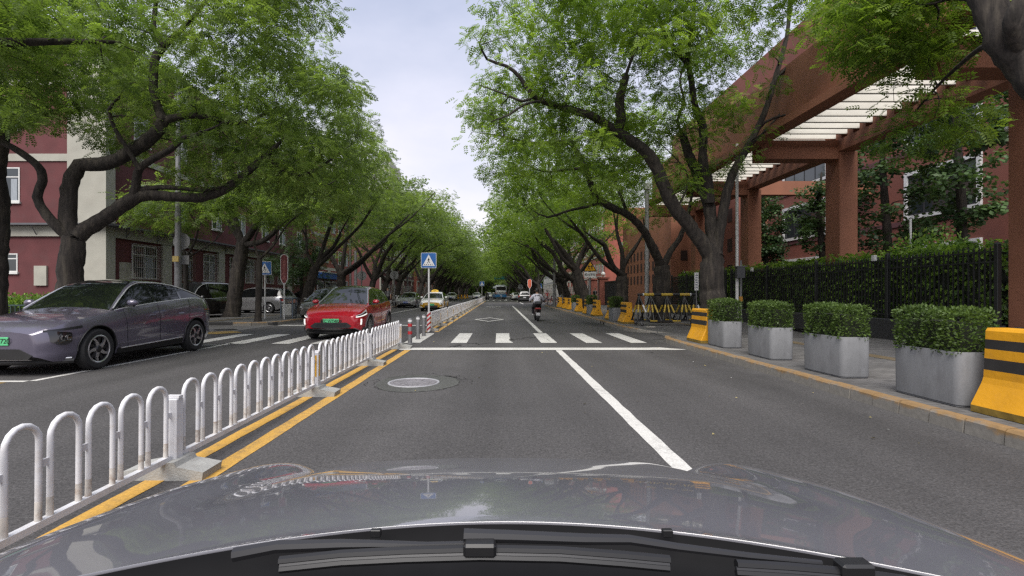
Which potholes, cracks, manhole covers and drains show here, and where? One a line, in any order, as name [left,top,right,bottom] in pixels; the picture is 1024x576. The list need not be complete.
manhole cover [376,375,460,392]
